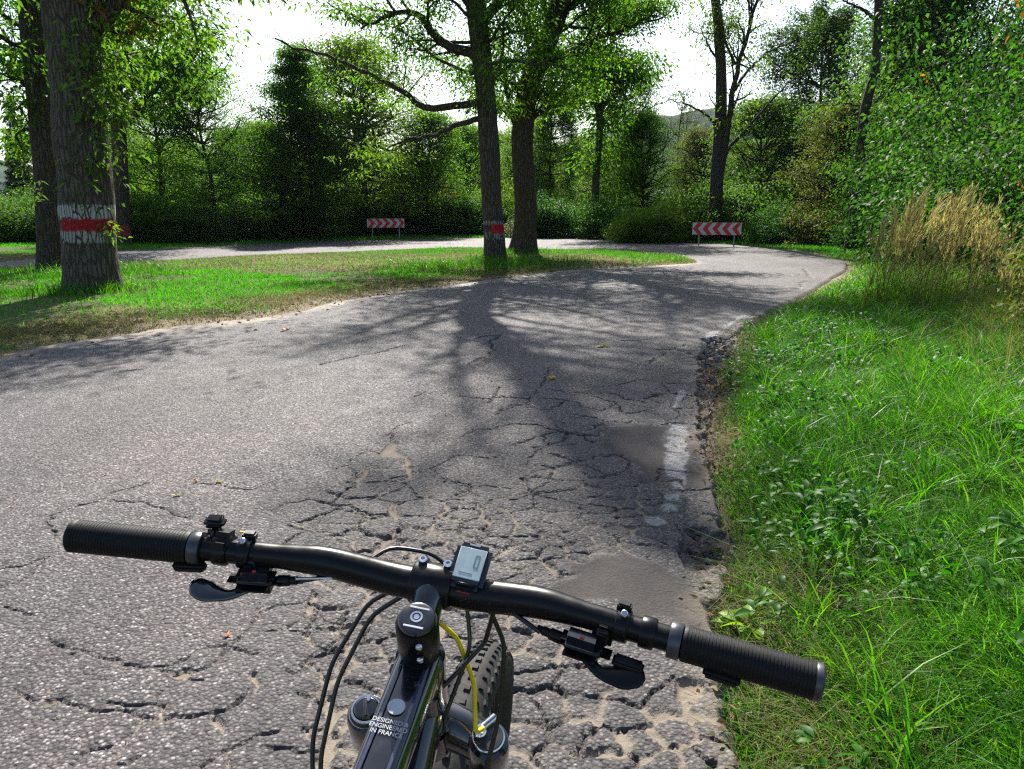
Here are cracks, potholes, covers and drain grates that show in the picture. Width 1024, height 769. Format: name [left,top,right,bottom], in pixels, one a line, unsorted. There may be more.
pothole [675,526,735,571]
crack [0,334,733,769]
